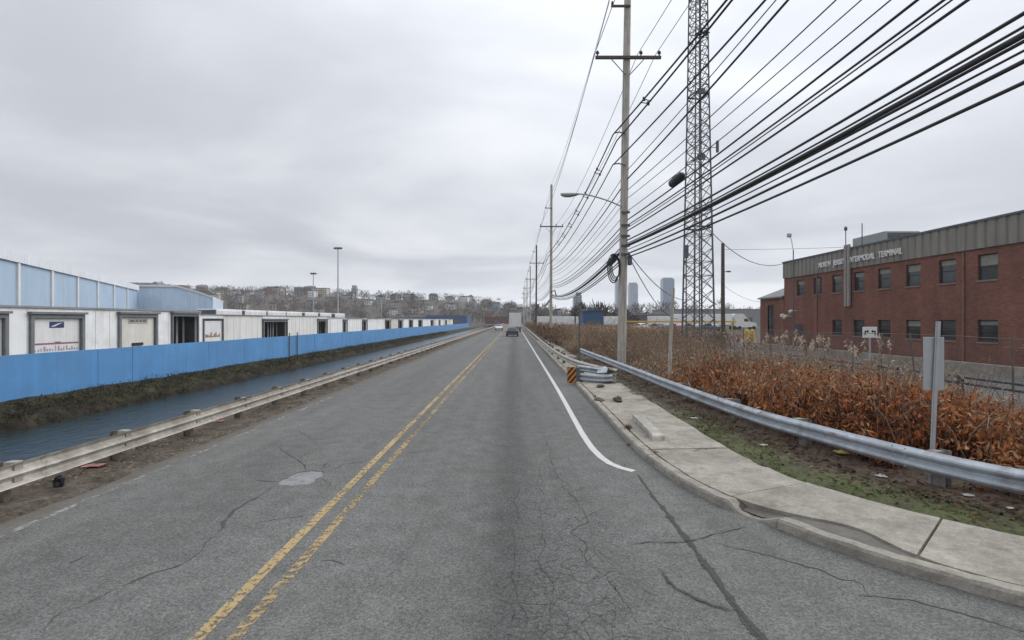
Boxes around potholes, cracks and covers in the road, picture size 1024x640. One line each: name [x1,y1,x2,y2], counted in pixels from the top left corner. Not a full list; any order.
crack [493,440,1024,640]
crack [45,429,370,628]
